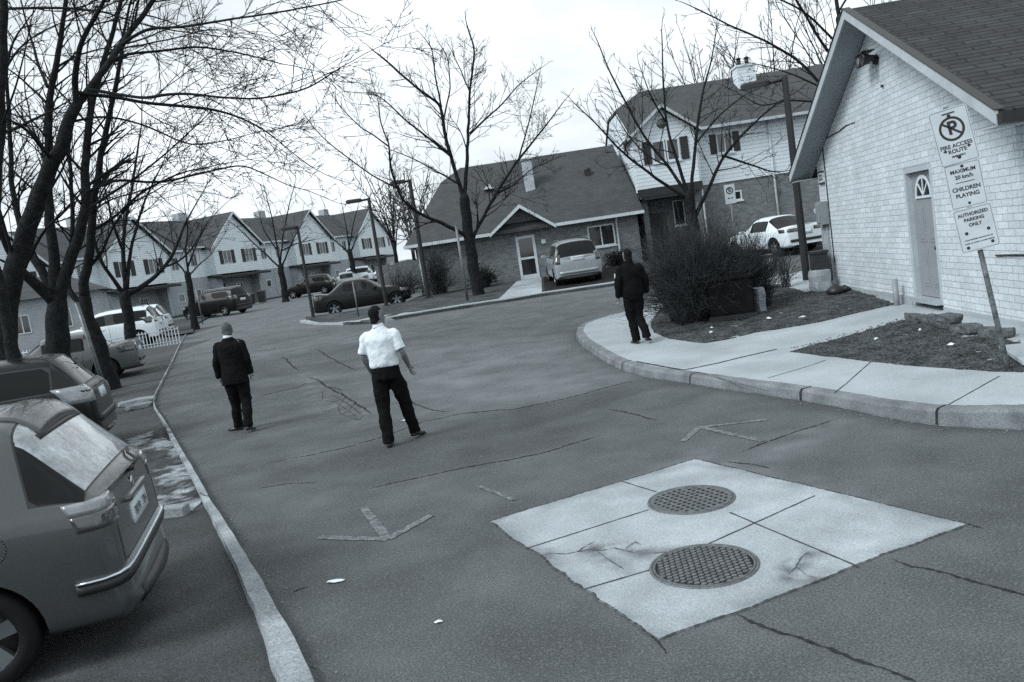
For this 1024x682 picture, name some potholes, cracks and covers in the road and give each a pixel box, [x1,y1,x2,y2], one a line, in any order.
crack [892,558,1024,595]
crack [265,350,372,419]
crack [726,421,828,468]
manhole cover [647,485,736,515]
manhole cover [649,543,760,589]
crack [547,541,667,568]
